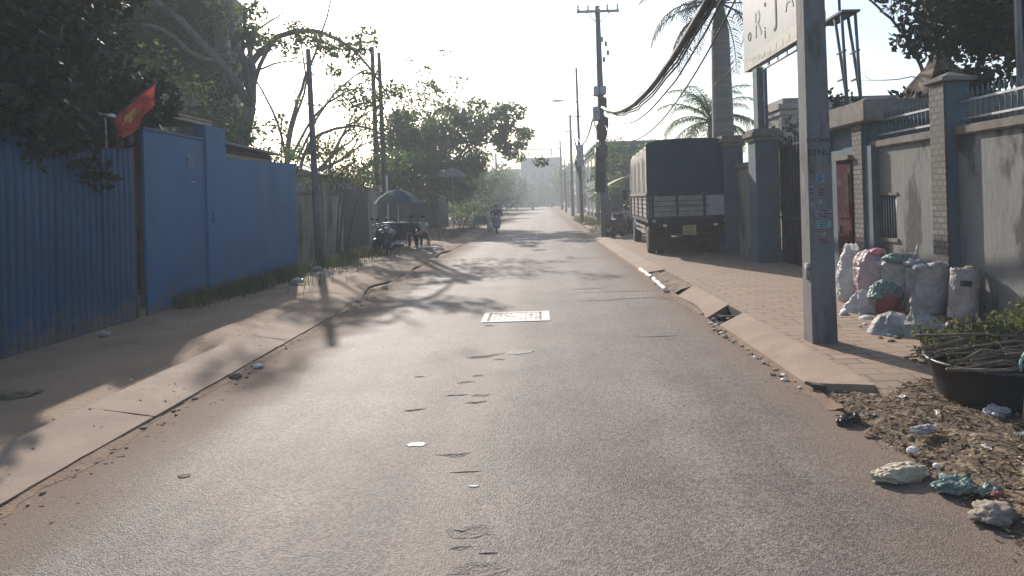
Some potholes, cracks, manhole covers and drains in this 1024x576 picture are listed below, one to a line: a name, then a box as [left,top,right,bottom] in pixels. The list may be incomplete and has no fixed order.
manhole cover [480,311,550,323]
drain grate [711,305,742,323]
crack [582,288,661,301]
